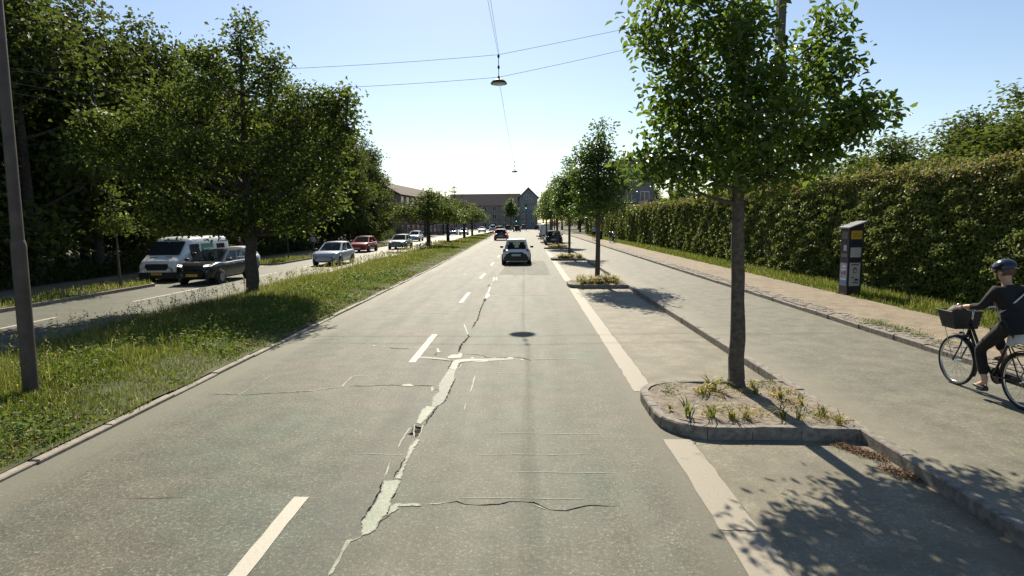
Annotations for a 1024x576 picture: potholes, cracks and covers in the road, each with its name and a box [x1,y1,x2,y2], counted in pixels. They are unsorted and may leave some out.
crack [217,277,608,576]
